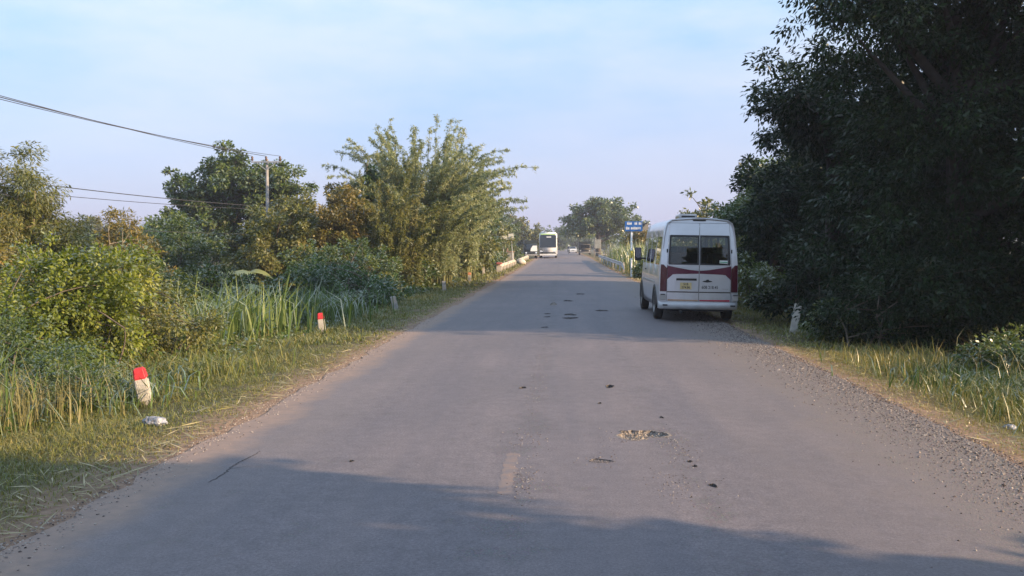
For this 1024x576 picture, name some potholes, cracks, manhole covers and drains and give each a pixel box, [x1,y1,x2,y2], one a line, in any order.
pothole [615,430,672,441]
